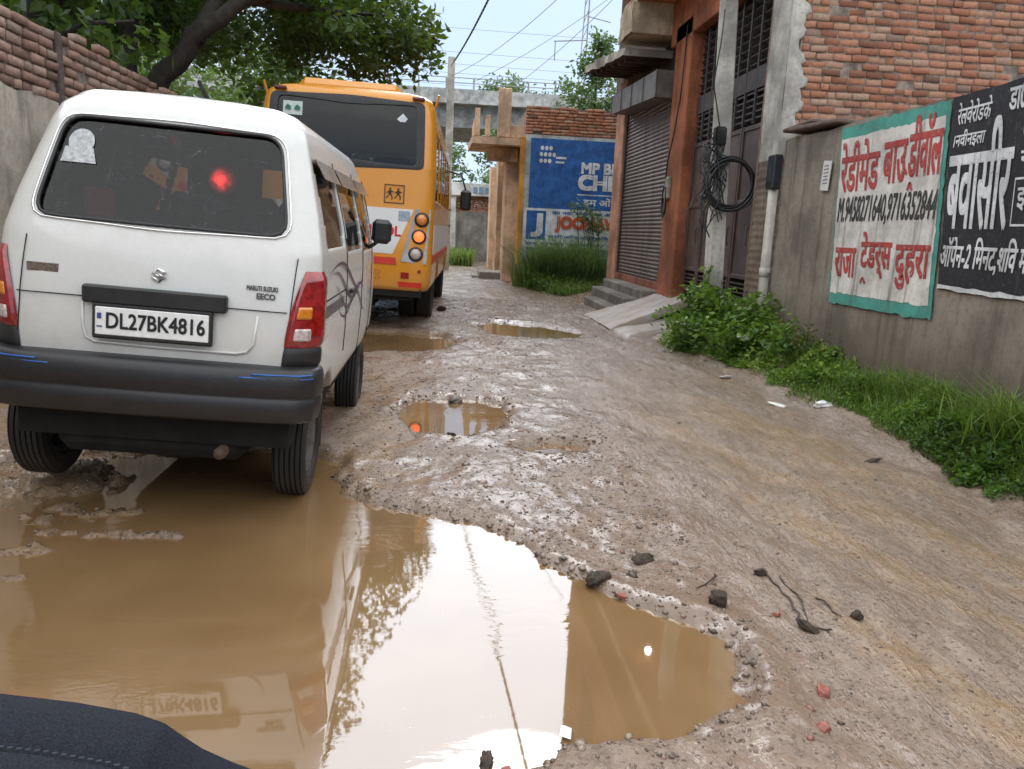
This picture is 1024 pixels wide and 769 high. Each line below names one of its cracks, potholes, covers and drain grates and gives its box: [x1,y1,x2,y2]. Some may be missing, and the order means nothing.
pothole [499,434,612,455]
pothole [468,318,592,339]
pothole [0,441,785,769]
pothole [361,328,469,352]
pothole [380,388,522,437]
